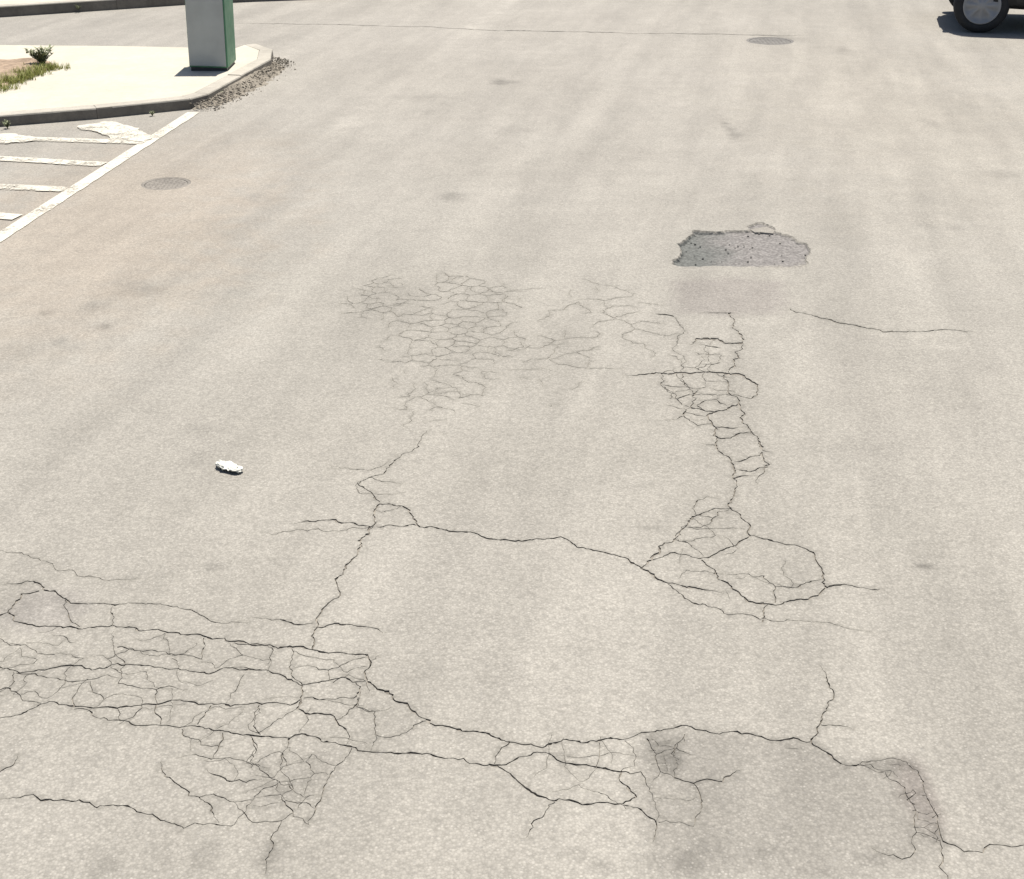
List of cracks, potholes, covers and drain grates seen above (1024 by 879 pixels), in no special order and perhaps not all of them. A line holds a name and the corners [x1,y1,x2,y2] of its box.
manhole cover [746,37,794,45]
crack [342,274,676,434]
crack [0,312,879,869]
crack [790,309,966,332]
pothole [671,222,812,269]
crack [860,758,1023,879]
